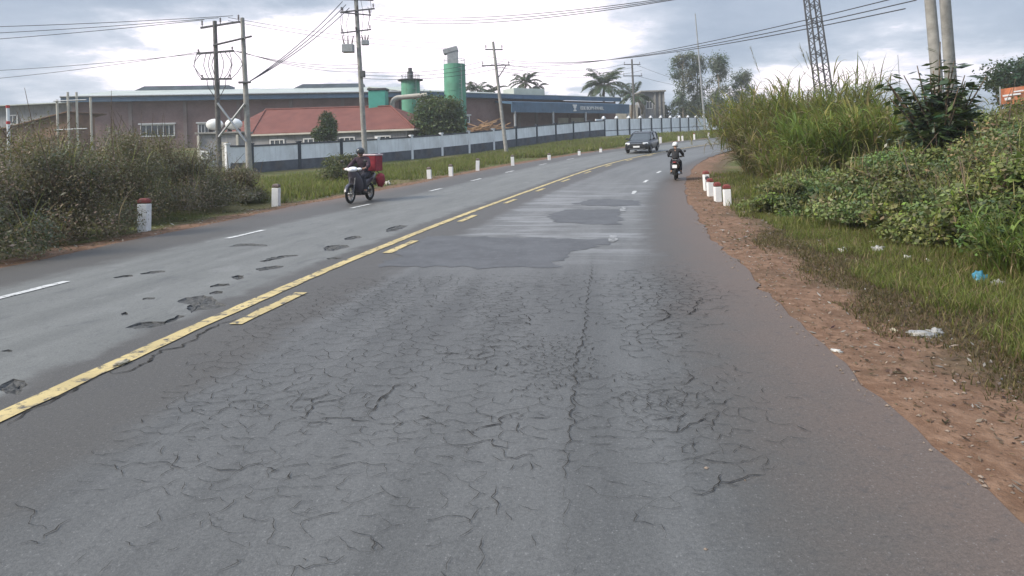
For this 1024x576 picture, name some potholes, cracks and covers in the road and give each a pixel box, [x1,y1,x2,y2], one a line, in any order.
crack [7,266,808,576]
pothole [177,295,227,313]
pothole [0,379,28,395]
pothole [126,315,184,329]
